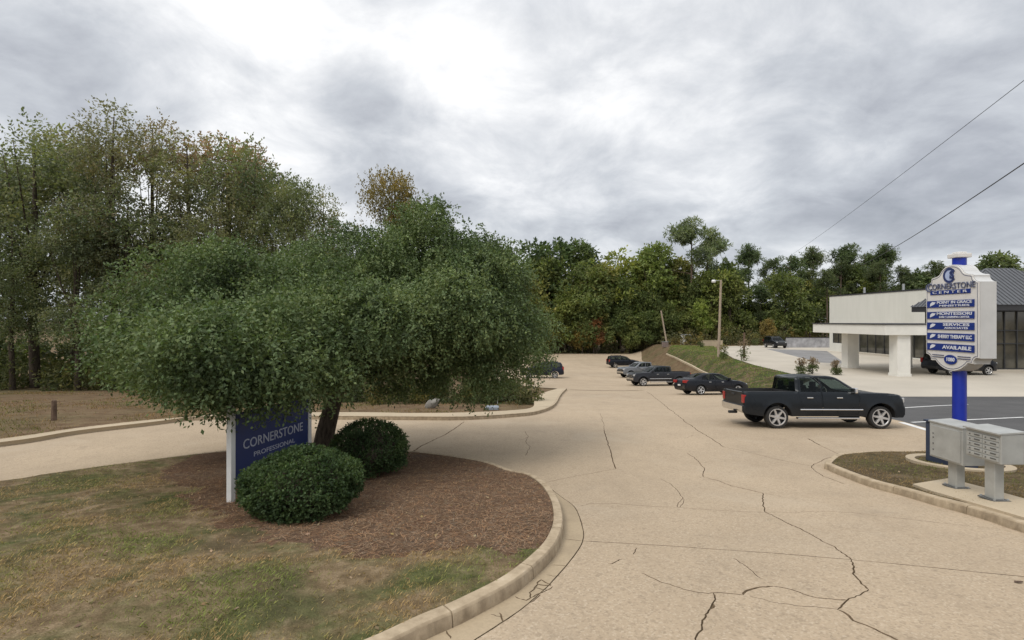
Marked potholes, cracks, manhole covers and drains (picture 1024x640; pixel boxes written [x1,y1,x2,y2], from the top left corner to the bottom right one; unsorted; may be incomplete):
crack [582,454,1005,640]
crack [652,395,793,463]
crack [549,414,616,482]
crack [491,565,565,622]
